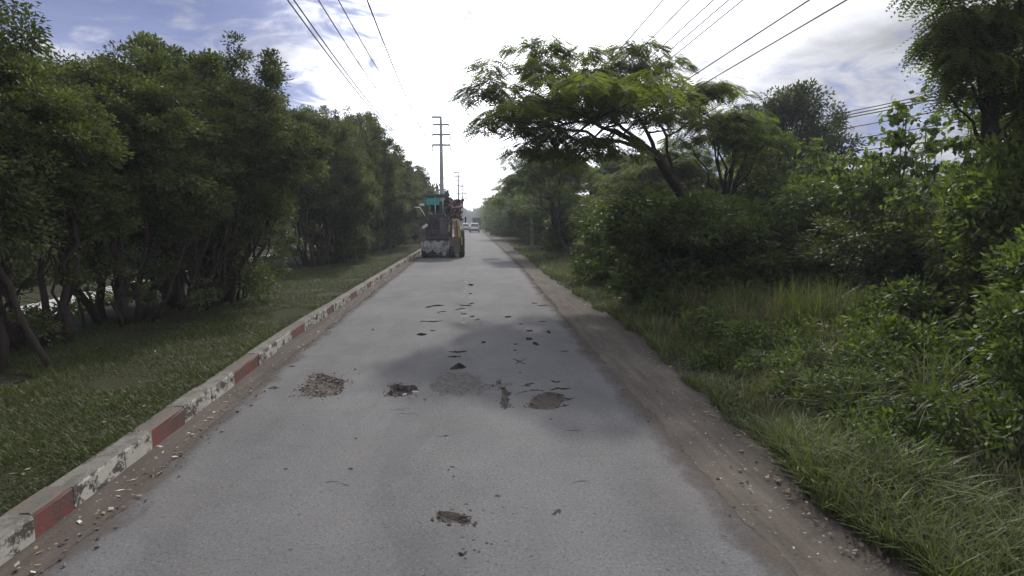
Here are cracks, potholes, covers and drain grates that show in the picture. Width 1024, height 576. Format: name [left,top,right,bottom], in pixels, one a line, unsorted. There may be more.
pothole [492,380,514,410]
pothole [523,390,569,410]
pothole [431,510,478,527]
pothole [287,371,360,400]
pothole [383,383,419,398]
